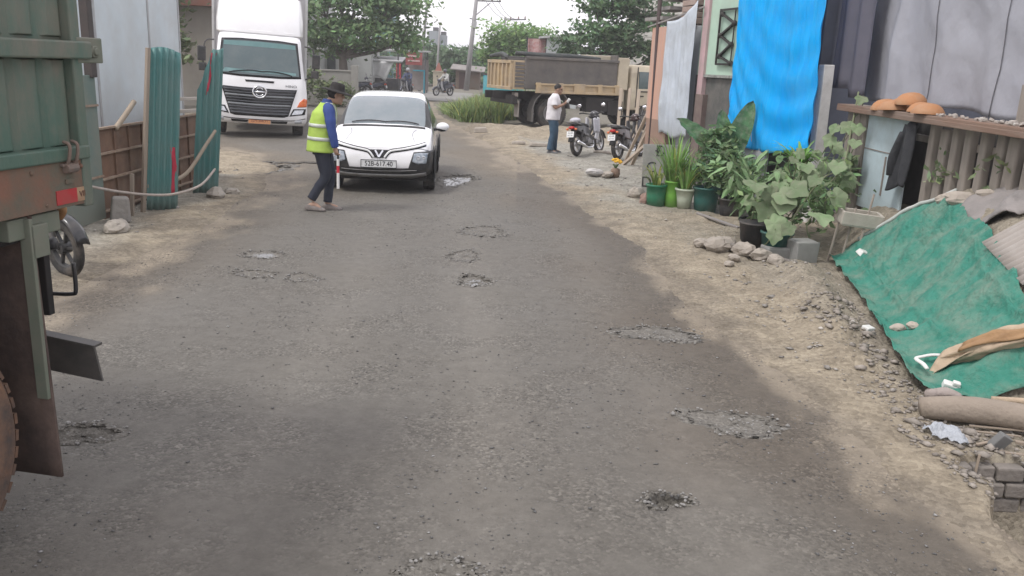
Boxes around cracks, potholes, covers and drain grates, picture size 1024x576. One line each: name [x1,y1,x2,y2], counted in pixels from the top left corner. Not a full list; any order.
pothole [236,249,287,260]
pothole [283,271,326,283]
pothole [452,271,497,288]
pothole [388,552,491,576]
pothole [228,268,282,280]
pothole [595,323,711,344]
pothole [435,172,483,189]
pothole [636,489,701,511]
pothole [58,419,130,446]
pothole [441,248,481,264]
pothole [671,405,797,441]
pothole [451,224,509,238]
